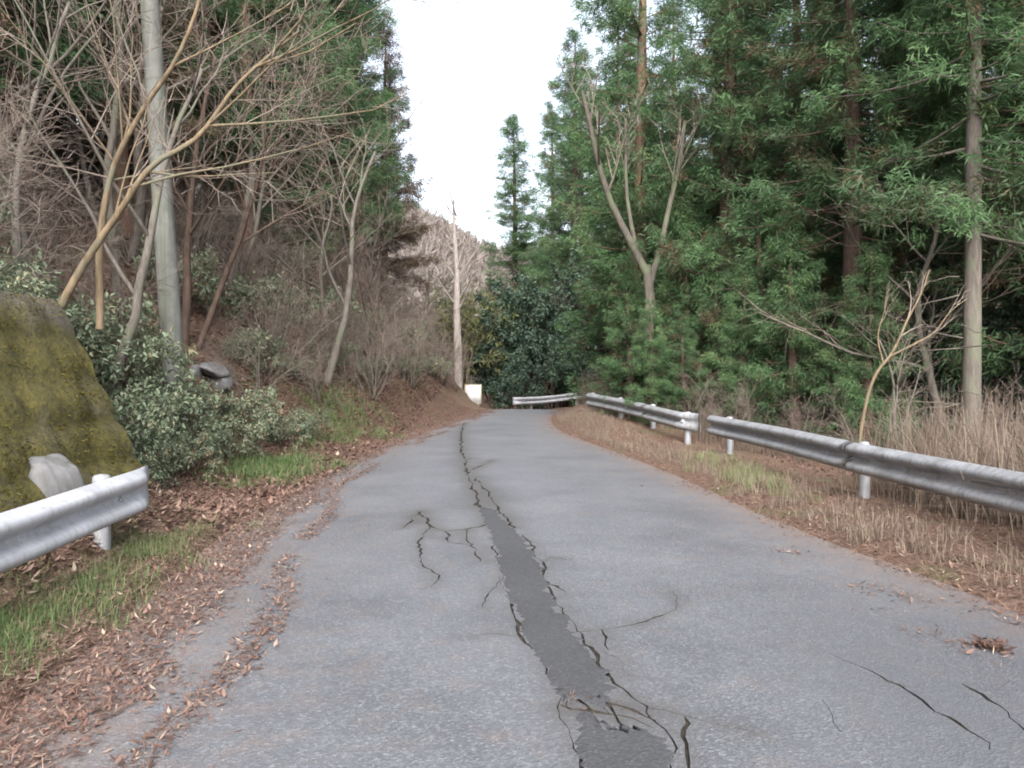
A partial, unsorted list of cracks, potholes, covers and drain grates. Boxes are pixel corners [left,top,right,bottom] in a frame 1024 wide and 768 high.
crack [828,652,1024,750]
crack [404,424,747,768]
